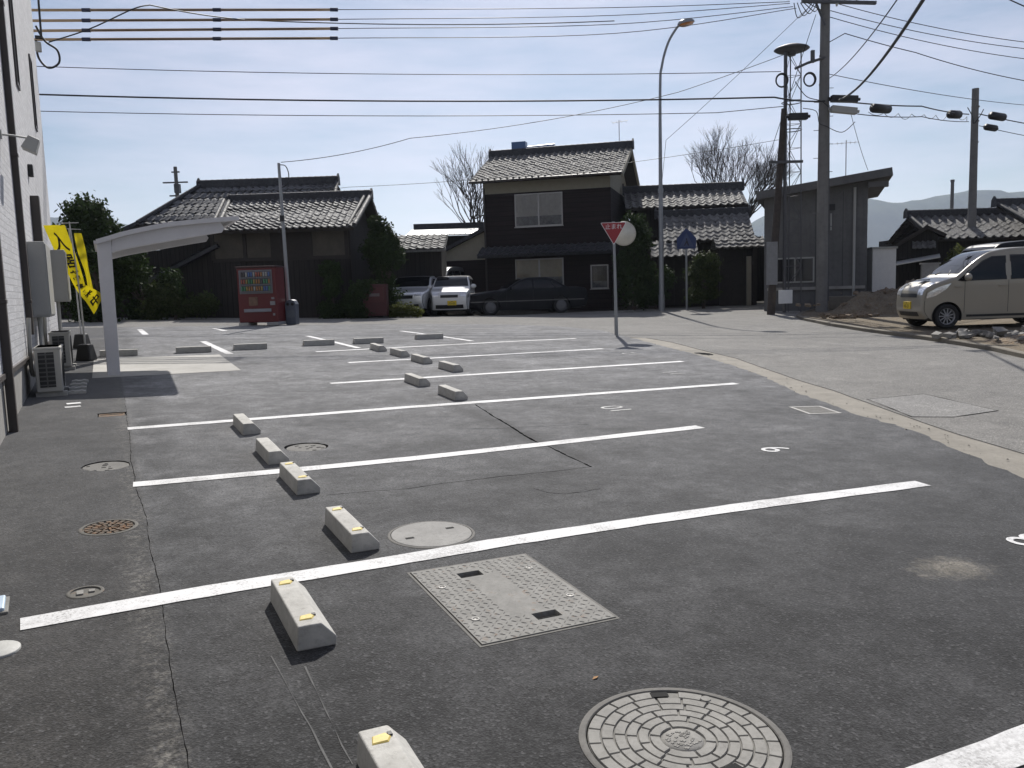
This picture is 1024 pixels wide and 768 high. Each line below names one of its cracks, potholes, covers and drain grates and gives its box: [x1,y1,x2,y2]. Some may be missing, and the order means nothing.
crack [124,396,189,768]
crack [332,405,597,495]
utility cover [407,553,620,648]
manhole cover [284,443,328,451]
manhole cover [78,519,139,536]
manhole cover [579,688,793,768]
manhole cover [388,521,475,549]
utility cover [66,585,105,599]
manhole cover [81,460,130,471]
